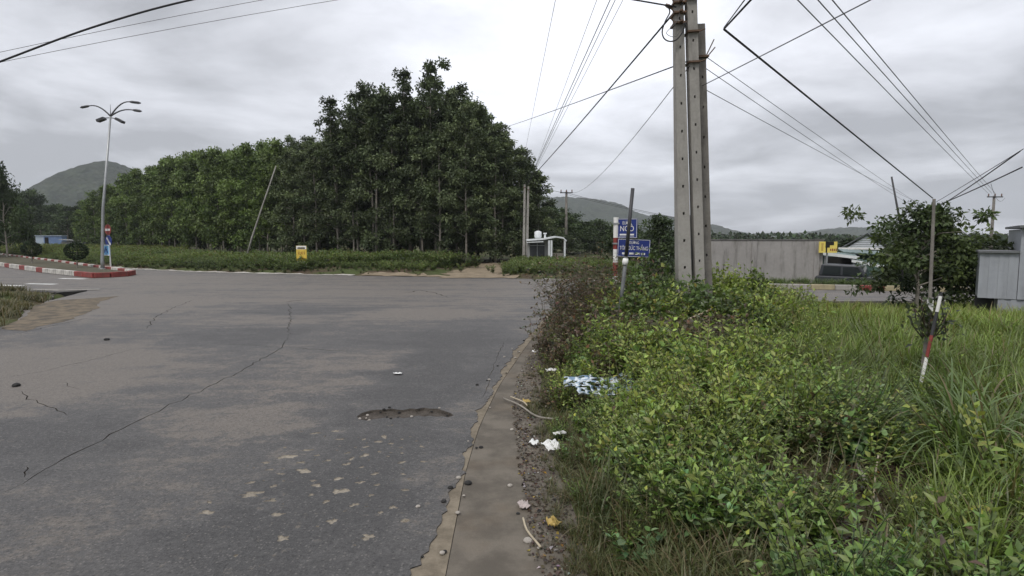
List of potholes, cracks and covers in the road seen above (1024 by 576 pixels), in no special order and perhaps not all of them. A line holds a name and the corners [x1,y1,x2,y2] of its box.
crack [5,300,331,492]
pothole [357,408,454,420]
